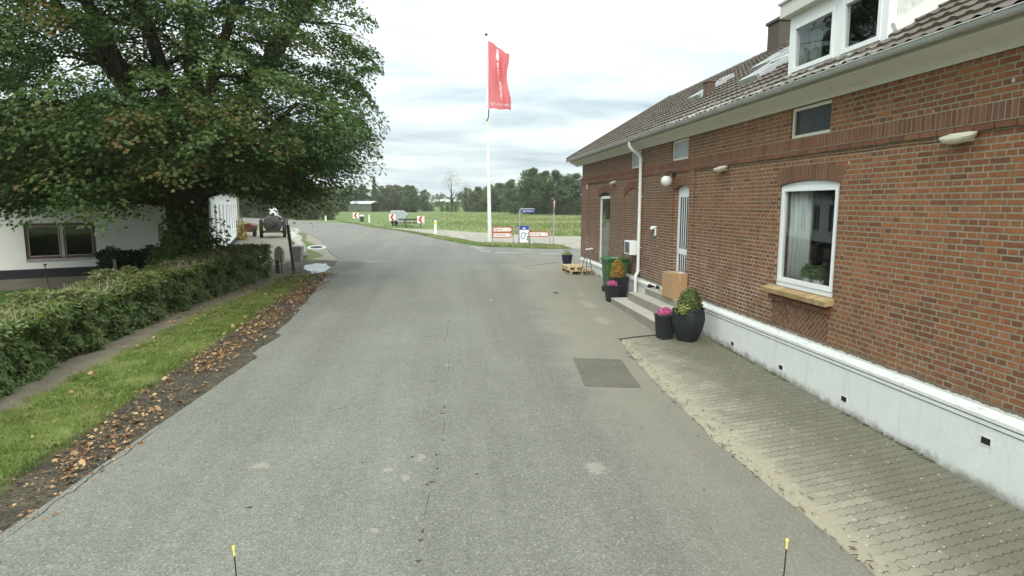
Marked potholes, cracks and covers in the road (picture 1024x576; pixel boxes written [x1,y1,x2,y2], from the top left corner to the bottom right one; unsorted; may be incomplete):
crack [415,321,454,563]
